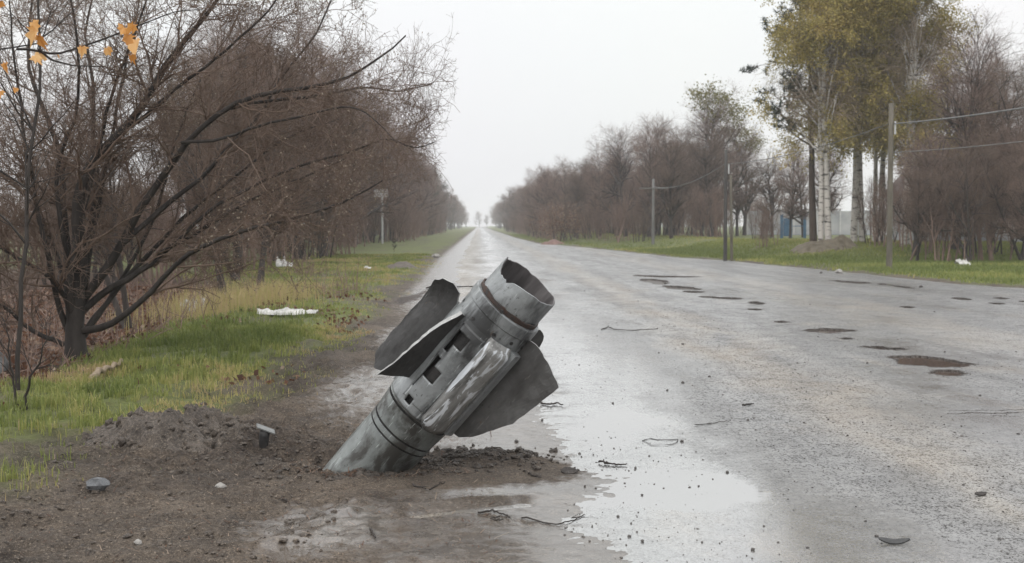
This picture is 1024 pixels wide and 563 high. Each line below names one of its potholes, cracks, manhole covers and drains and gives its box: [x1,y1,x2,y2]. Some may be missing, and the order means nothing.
crack [954,409,1023,417]
pothole [886,355,979,368]
